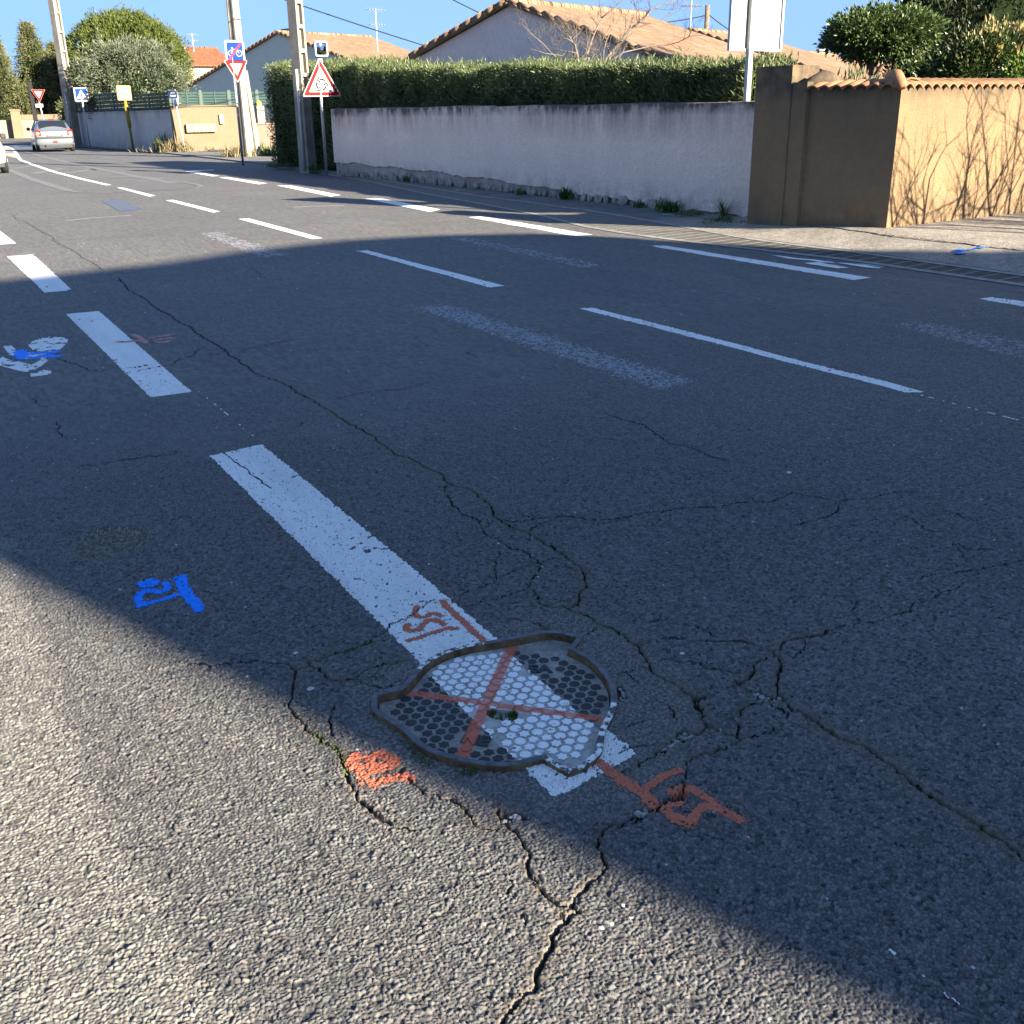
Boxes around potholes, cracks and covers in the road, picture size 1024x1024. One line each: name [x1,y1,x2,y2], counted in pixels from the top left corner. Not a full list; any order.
crack [399,585,1021,1024]
crack [905,511,1021,579]
crack [7,213,920,648]
manhole cover [371,630,617,778]
